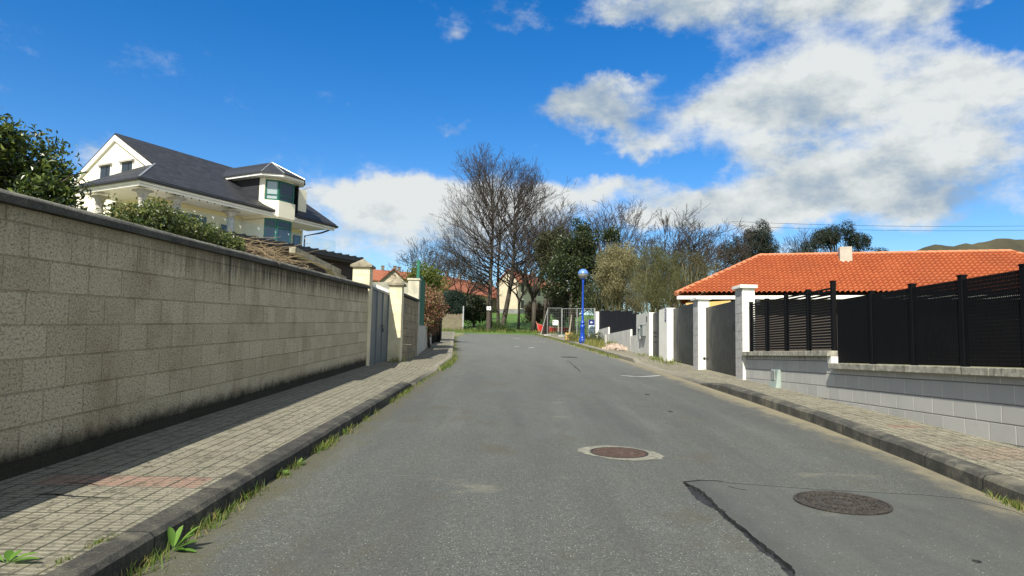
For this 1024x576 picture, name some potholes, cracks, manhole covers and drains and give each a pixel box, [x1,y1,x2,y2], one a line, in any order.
crack [683,480,1012,576]
manhole cover [578,445,665,461]
manhole cover [793,491,893,515]
